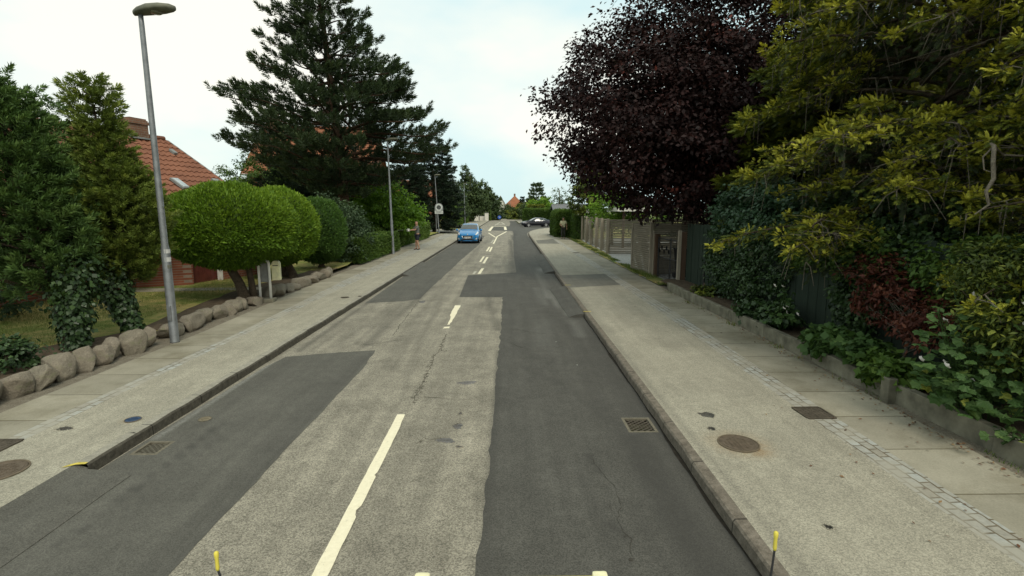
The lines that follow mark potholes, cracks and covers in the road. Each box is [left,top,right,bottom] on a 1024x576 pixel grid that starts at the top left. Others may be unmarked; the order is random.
manhole cover [717,434,760,453]
drain grate [621,418,658,432]
crack [592,457,636,561]
manhole cover [0,459,31,480]
drain grate [129,441,175,455]
manhole cover [0,439,24,452]
crack [411,333,486,403]
manhole cover [791,406,837,419]
